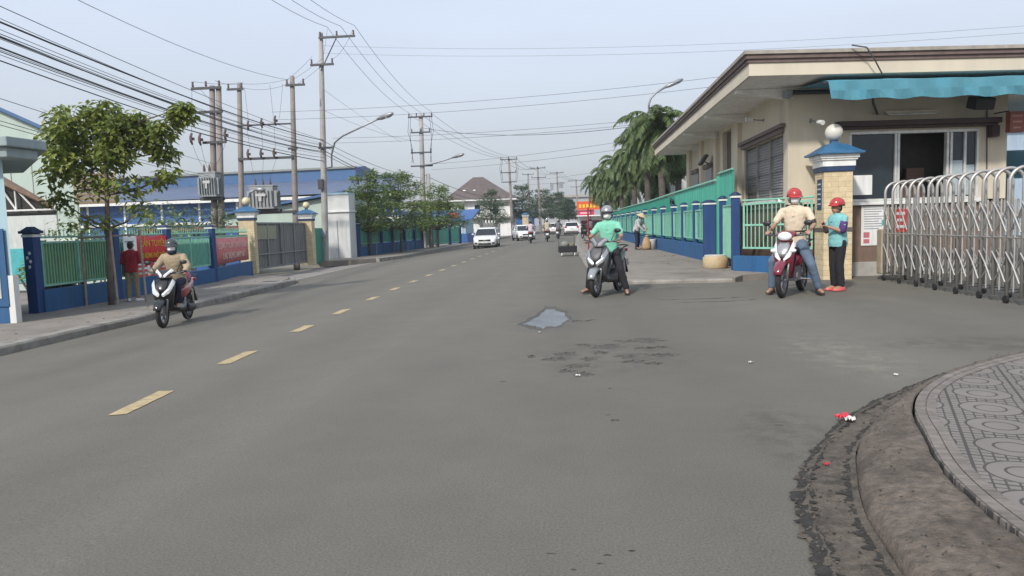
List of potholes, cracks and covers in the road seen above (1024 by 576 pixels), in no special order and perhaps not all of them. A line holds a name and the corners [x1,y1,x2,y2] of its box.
pothole [516,306,595,330]
